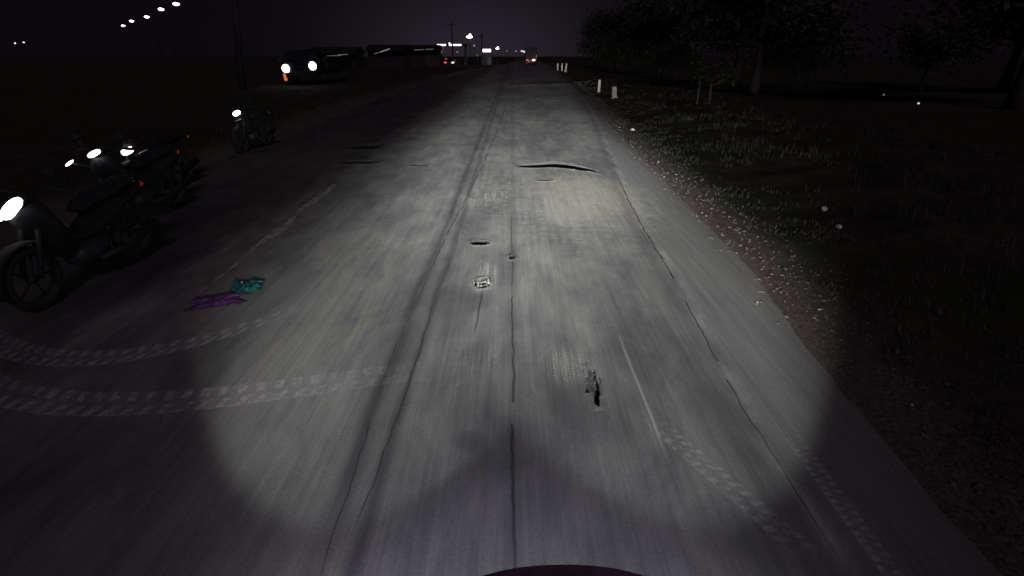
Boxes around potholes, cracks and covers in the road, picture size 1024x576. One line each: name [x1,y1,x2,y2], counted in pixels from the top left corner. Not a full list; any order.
pothole [468,275,497,291]
crack [510,215,526,568]
pothole [503,253,521,262]
pothole [465,238,495,247]
crack [320,98,508,575]
pothole [510,161,605,175]
pothole [576,361,610,411]
